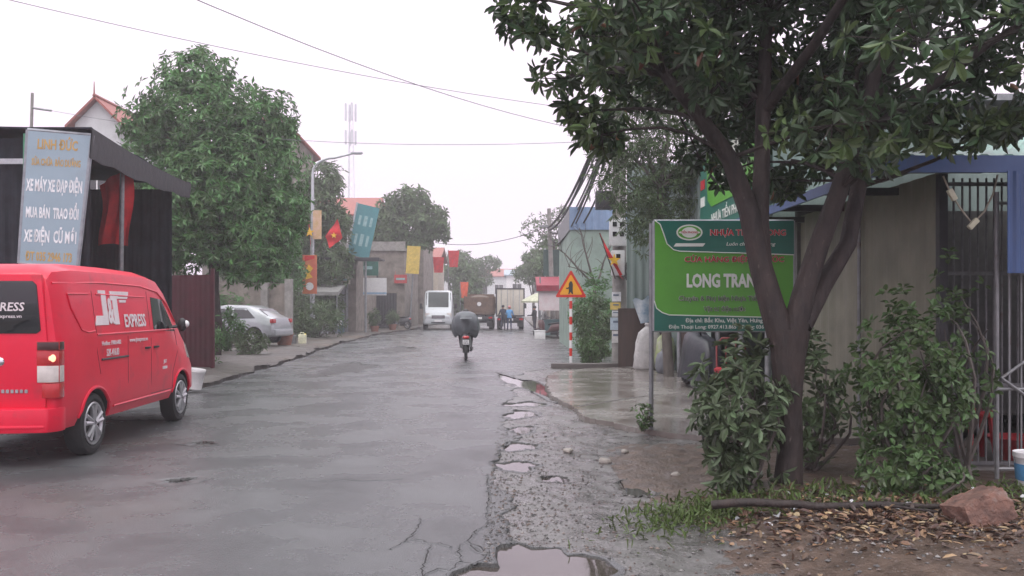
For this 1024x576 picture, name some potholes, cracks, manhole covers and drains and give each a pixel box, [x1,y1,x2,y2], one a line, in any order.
crack [389,474,492,576]
pothole [441,541,627,576]
pothole [488,460,544,473]
pothole [496,409,544,420]
pothole [535,474,575,484]
pothole [492,372,558,404]
pothole [503,425,538,435]
pothole [496,440,543,452]
